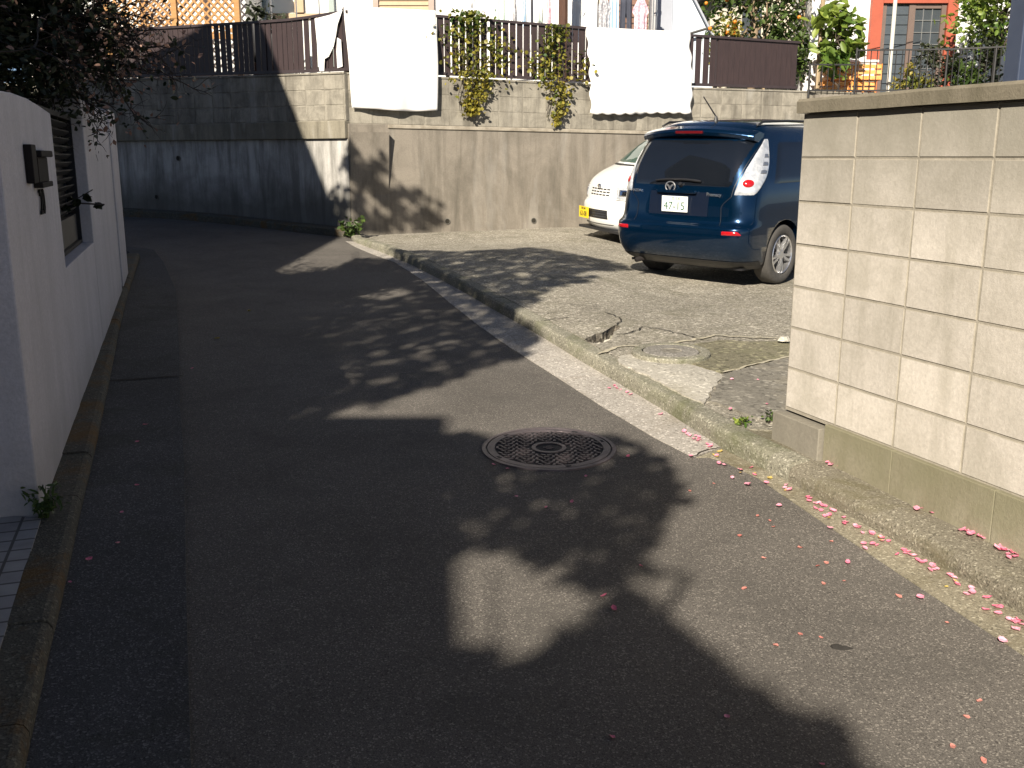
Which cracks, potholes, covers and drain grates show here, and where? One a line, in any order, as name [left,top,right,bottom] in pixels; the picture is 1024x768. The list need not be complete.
manhole cover [482,427,617,472]
crack [605,312,703,340]
manhole cover [631,342,711,365]
